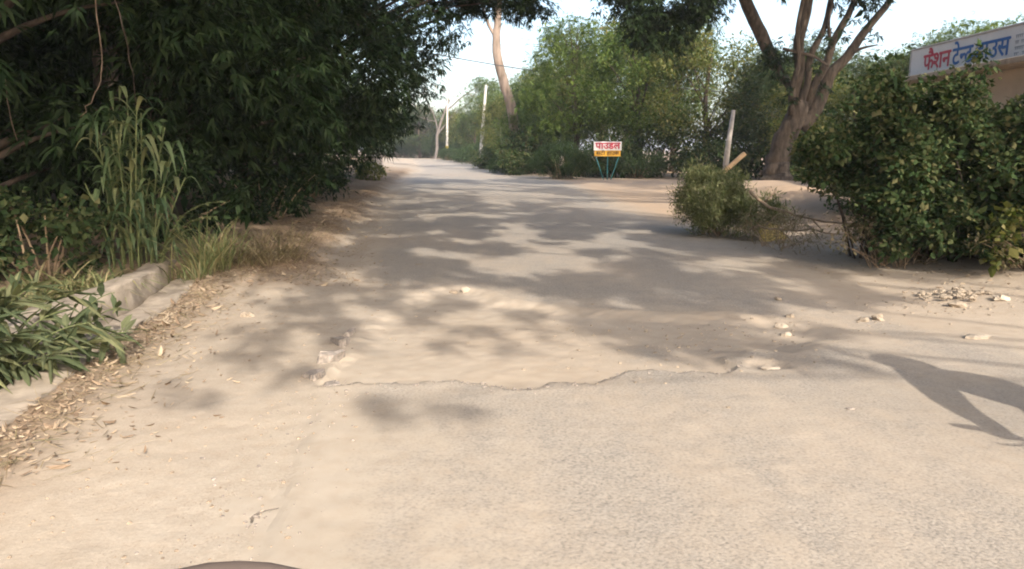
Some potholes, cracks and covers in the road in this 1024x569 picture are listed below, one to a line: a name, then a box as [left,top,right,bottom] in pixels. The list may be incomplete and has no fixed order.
pothole [309,284,854,391]
